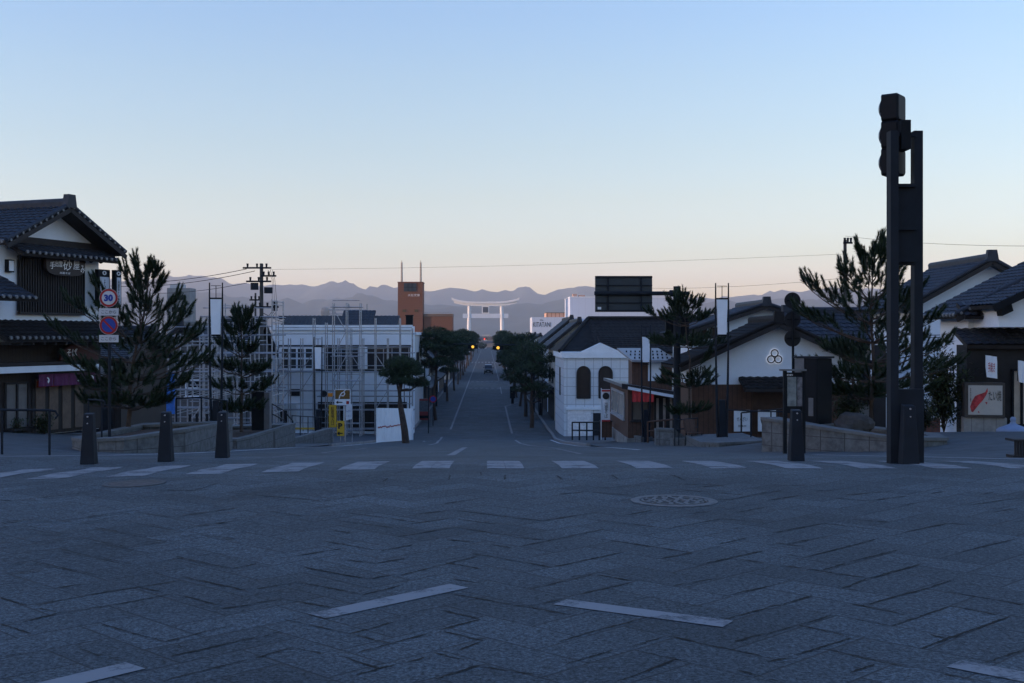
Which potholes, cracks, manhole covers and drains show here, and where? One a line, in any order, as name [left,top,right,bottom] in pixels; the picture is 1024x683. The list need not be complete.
manhole cover [102,479,166,487]
manhole cover [631,495,718,507]
